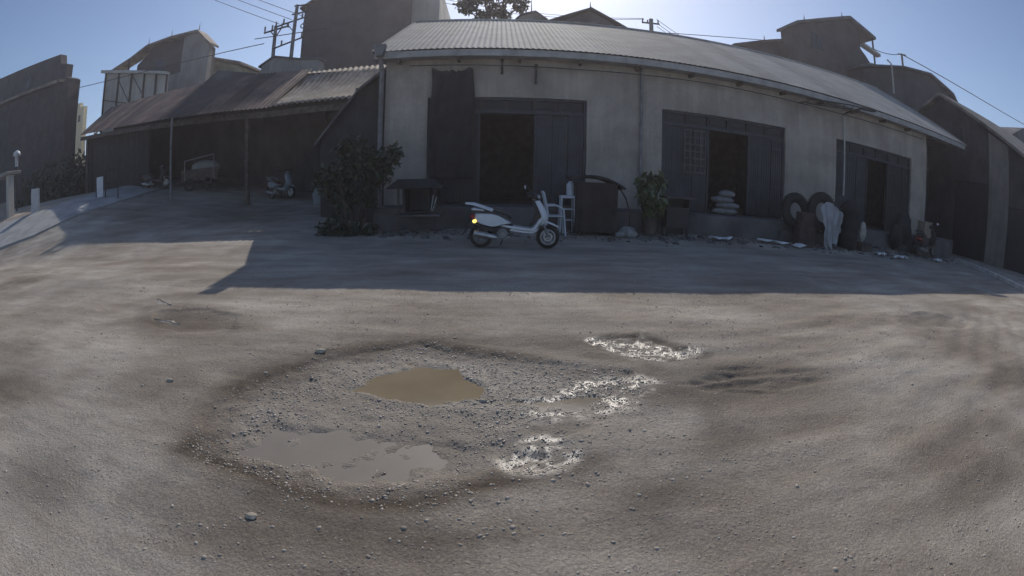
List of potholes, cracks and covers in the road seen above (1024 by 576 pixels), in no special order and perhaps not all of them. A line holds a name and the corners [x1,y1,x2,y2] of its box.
pothole [582,332,712,363]
pothole [141,307,243,334]
pothole [178,339,651,515]
